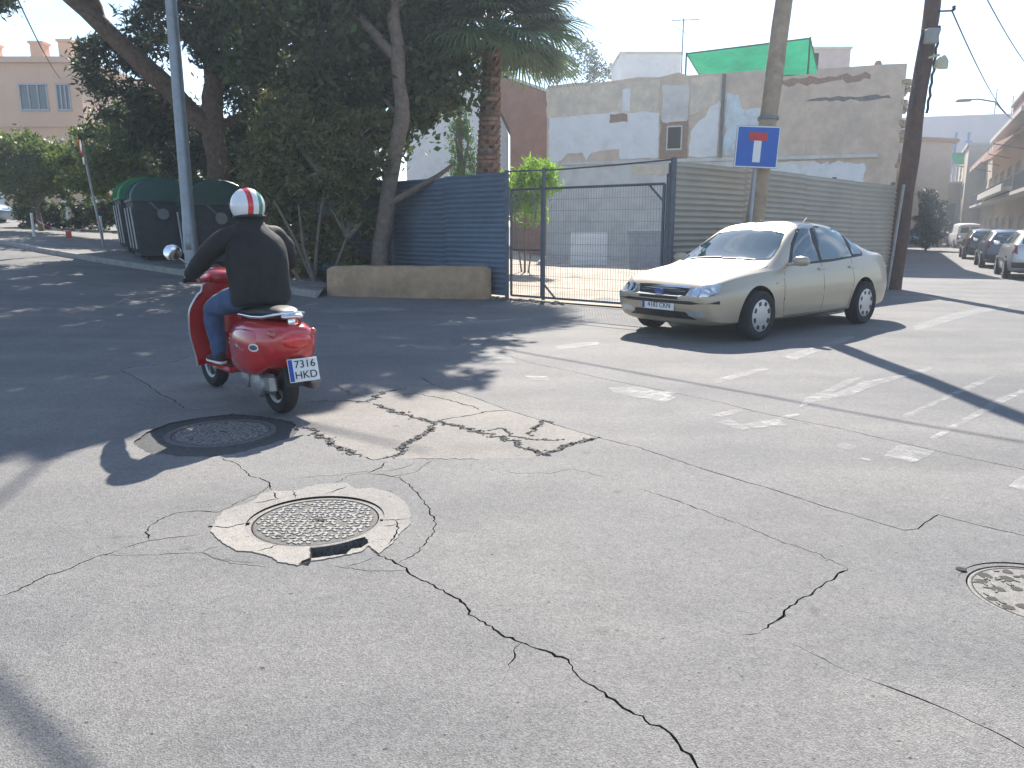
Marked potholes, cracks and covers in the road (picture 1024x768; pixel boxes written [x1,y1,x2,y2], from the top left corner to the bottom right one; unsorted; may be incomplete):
crack [0,385,699,768]
manhole cover [959,563,1024,621]
manhole cover [208,483,411,566]
manhole cover [134,414,299,457]
crack [120,357,188,408]
